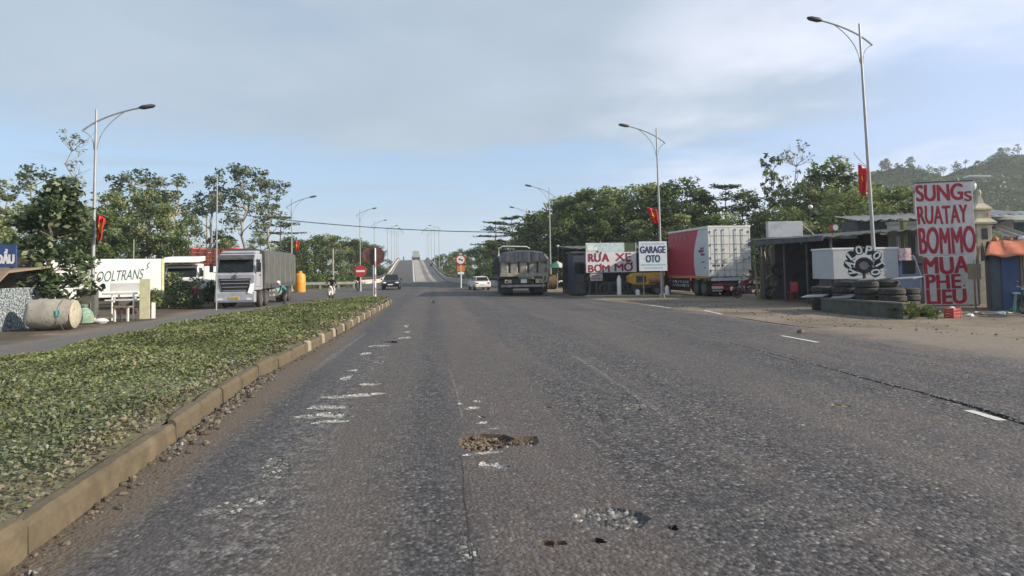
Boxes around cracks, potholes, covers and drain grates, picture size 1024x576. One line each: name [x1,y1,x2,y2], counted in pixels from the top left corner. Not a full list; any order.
crack [721,340,1024,425]
pothole [572,507,651,530]
pothole [459,434,539,451]
